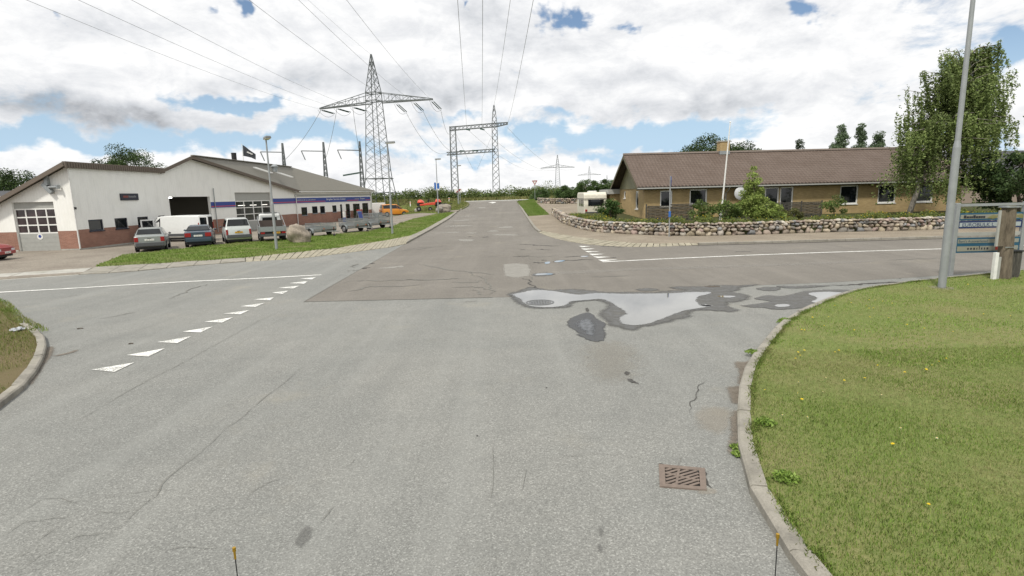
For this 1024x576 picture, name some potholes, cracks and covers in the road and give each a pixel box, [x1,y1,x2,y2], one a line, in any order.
crack [347,245,495,302]
crack [6,497,105,566]
drain grate [659,464,707,491]
crack [82,365,303,551]
